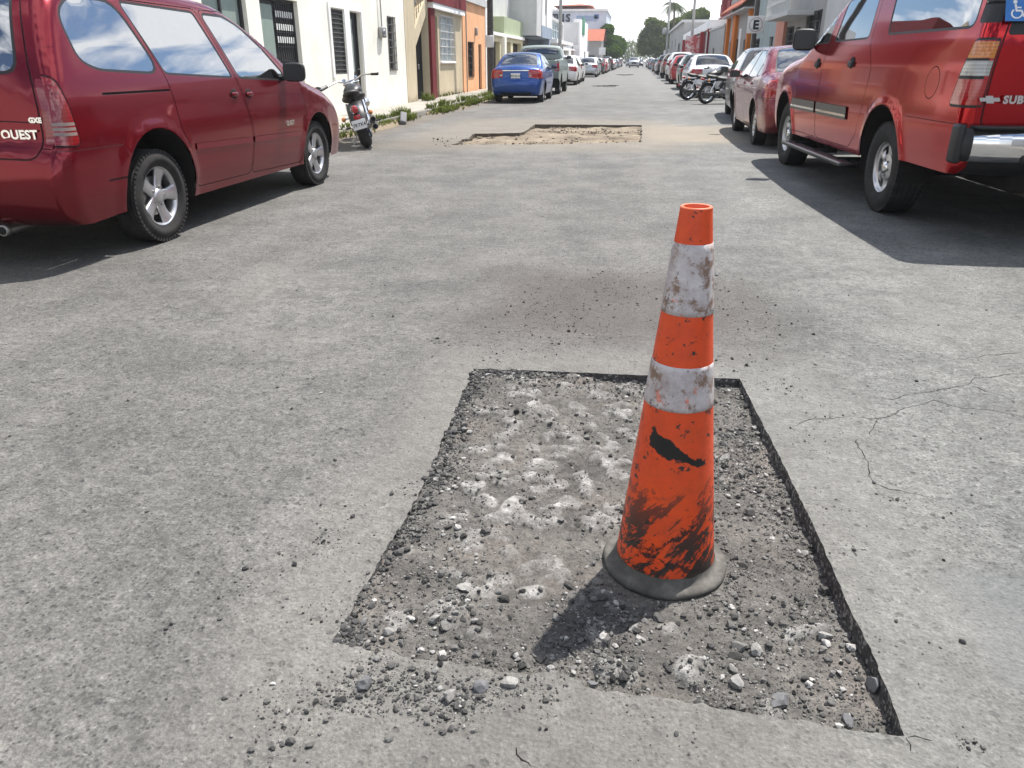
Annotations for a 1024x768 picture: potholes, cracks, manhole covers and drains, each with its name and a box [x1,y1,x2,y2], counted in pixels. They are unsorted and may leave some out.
pothole [452,124,643,145]
crack [792,352,1024,500]
pothole [337,369,904,736]
